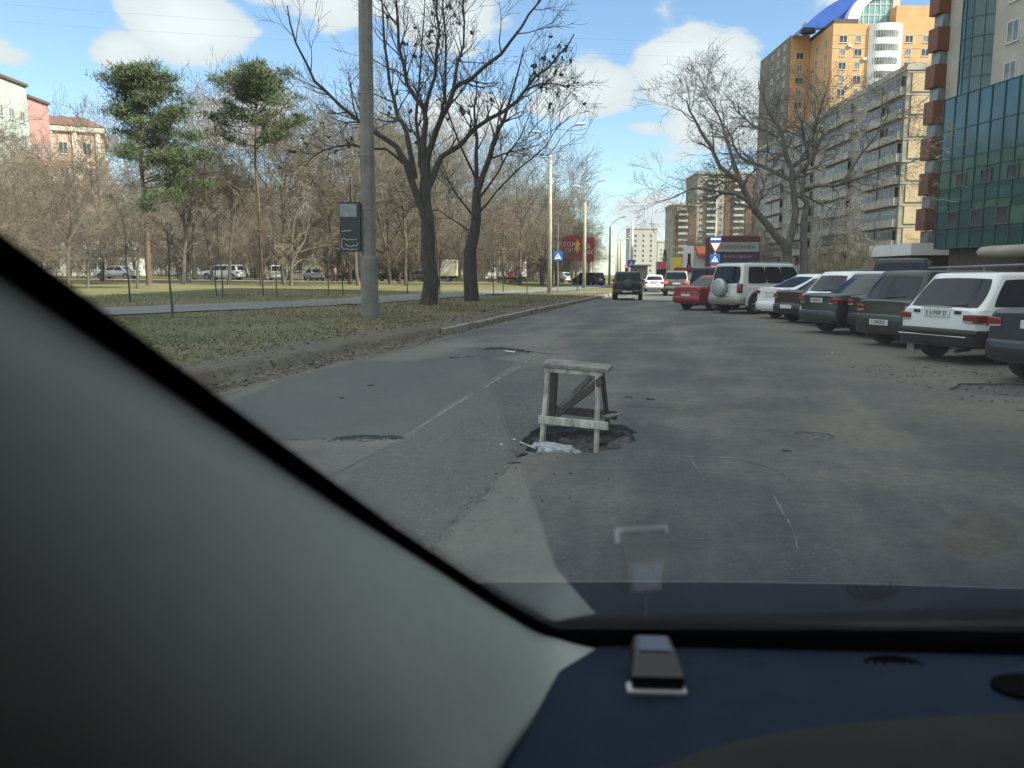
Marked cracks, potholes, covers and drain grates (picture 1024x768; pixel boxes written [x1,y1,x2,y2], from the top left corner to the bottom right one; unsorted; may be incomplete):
crack [420,448,529,550]
pothole [519,424,638,453]
